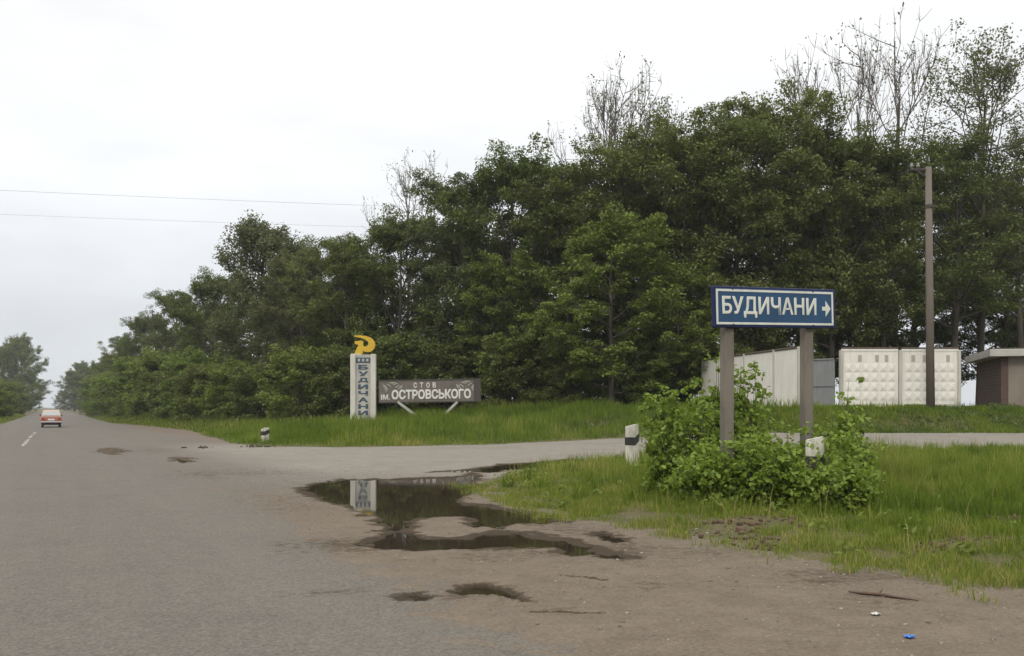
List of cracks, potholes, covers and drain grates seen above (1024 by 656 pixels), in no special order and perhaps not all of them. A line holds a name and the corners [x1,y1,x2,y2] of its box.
pothole [94,447,133,455]
pothole [382,590,448,602]
pothole [442,581,544,603]
pothole [295,472,643,560]
